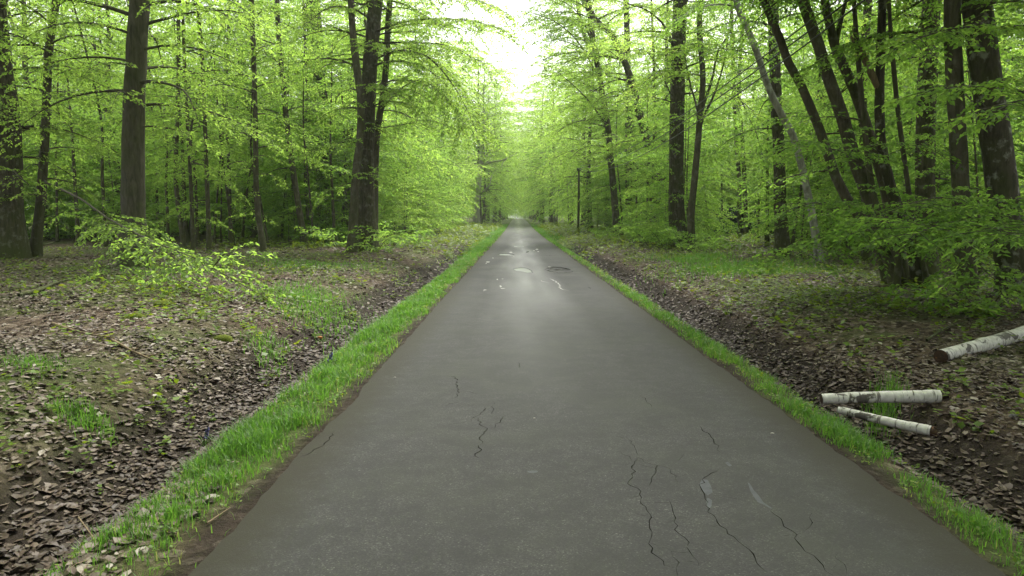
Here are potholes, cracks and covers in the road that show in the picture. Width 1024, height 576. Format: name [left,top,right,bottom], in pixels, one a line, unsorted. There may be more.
crack [449,377,503,454]
crack [699,470,764,570]
crack [773,513,847,575]
